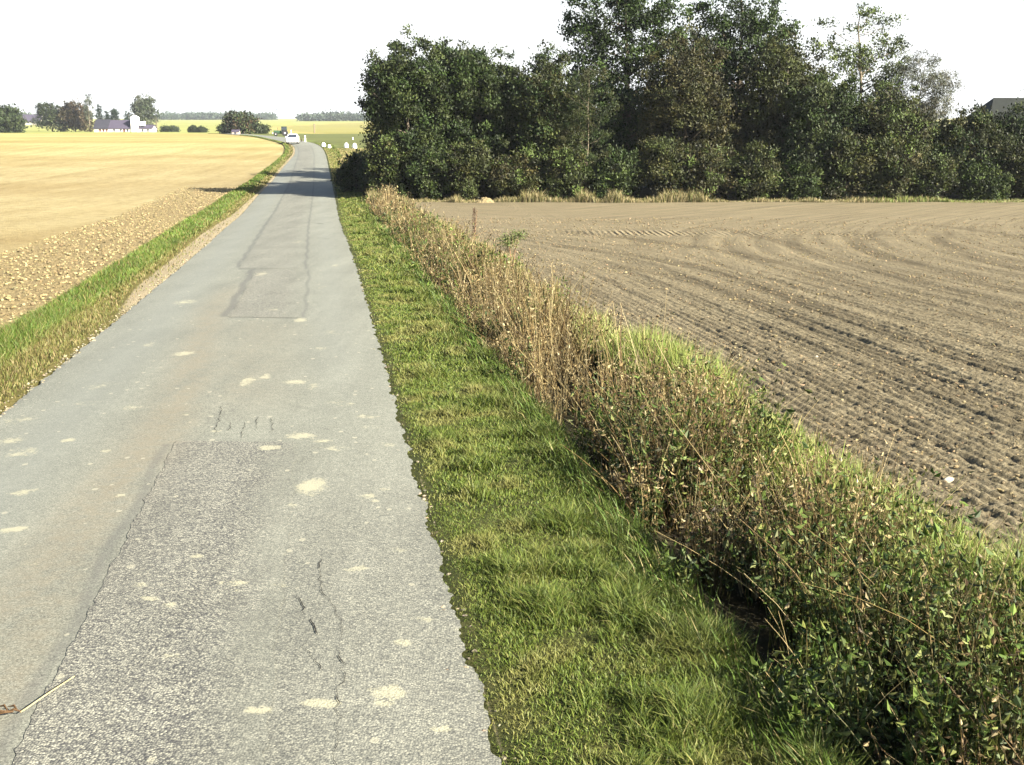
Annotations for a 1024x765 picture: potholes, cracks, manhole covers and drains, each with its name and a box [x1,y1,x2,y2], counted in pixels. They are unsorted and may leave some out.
crack [296,559,346,765]
